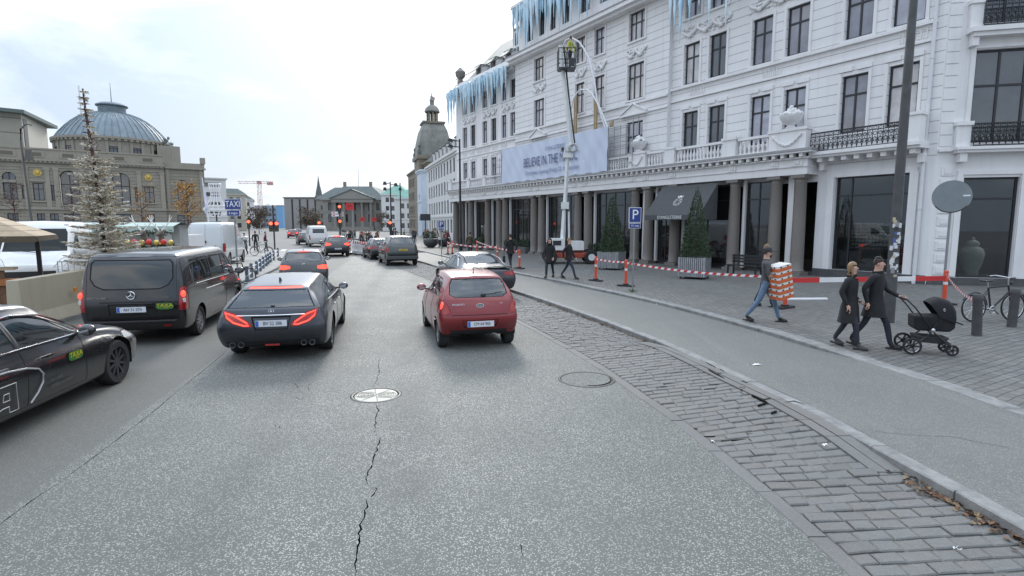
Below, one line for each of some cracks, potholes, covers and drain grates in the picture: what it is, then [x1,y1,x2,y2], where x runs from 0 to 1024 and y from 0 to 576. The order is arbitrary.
crack [345,365,380,575]
manhole cover [350,387,402,403]
manhole cover [558,372,615,388]
